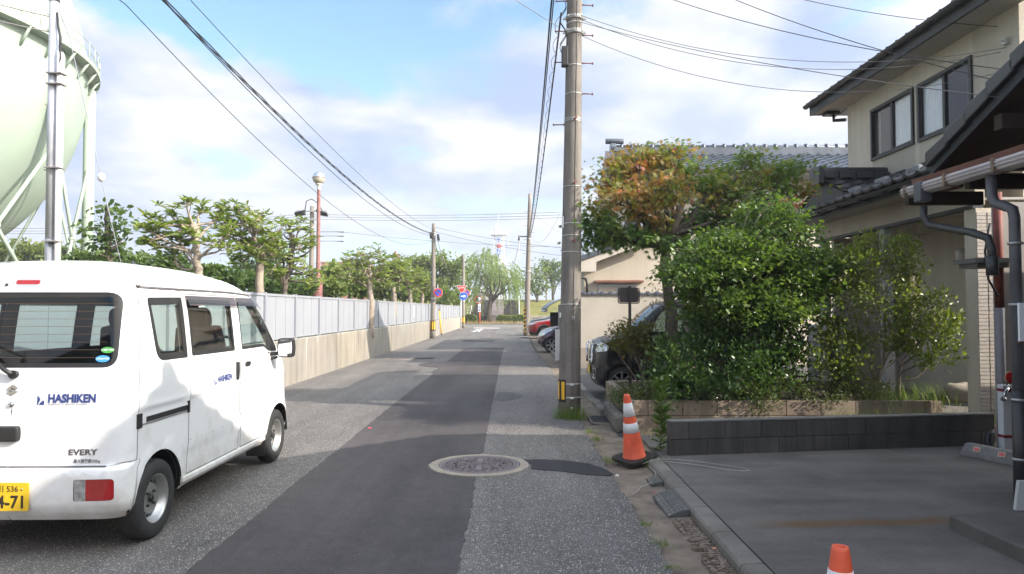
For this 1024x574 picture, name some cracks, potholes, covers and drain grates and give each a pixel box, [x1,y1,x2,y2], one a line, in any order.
drain grate [588,415,610,424]
manhole cover [429,454,529,477]
